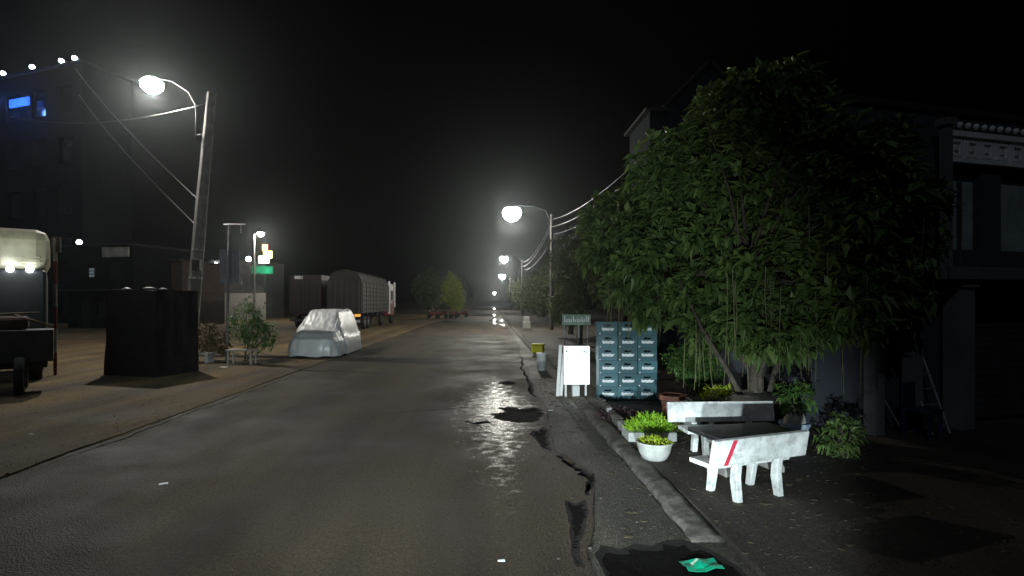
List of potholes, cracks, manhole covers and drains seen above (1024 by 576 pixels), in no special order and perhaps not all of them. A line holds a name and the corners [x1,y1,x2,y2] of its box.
crack [520,356,536,397]
crack [556,455,595,495]
pothole [564,500,589,567]
pothole [529,427,552,452]
pothole [493,407,545,423]
